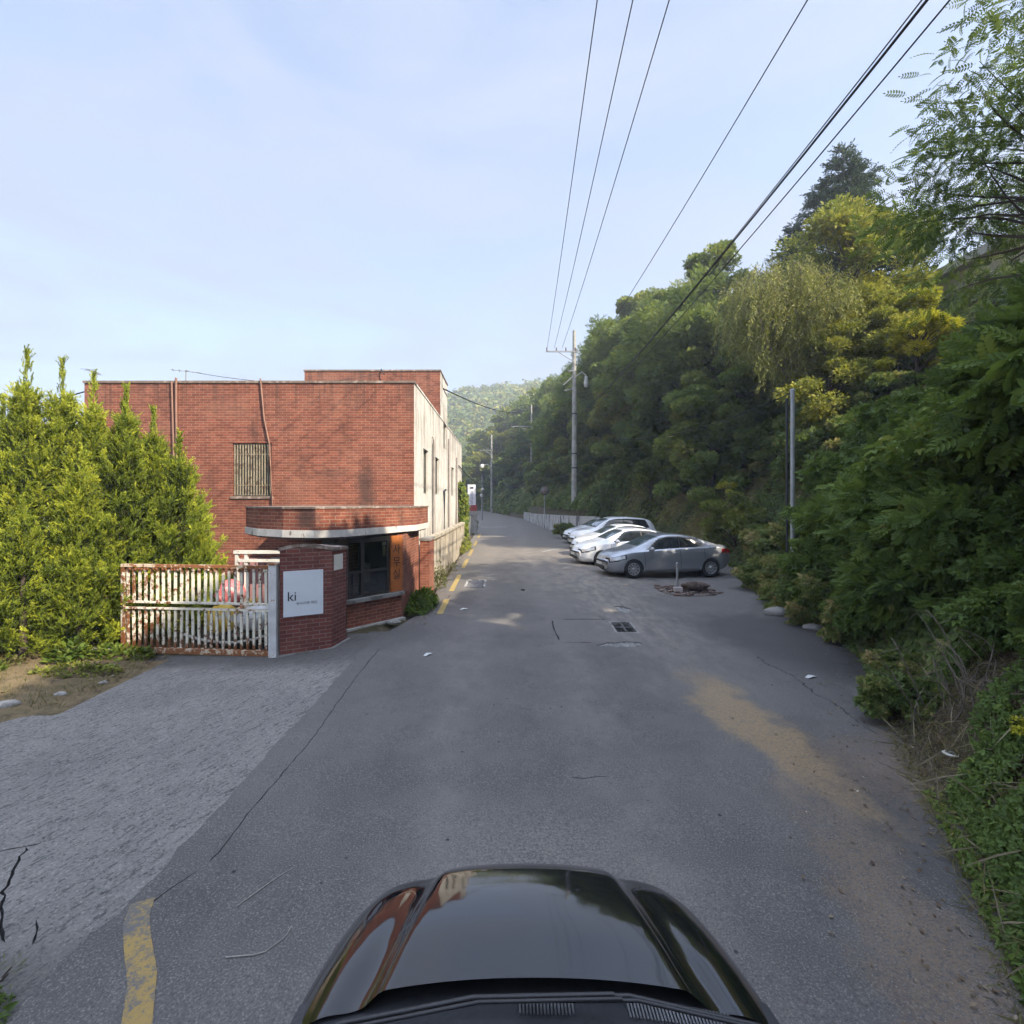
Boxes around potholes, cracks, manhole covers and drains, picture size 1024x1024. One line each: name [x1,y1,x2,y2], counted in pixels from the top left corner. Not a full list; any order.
crack [154,651,378,901]
crack [0,843,41,945]
crack [756,657,878,735]
